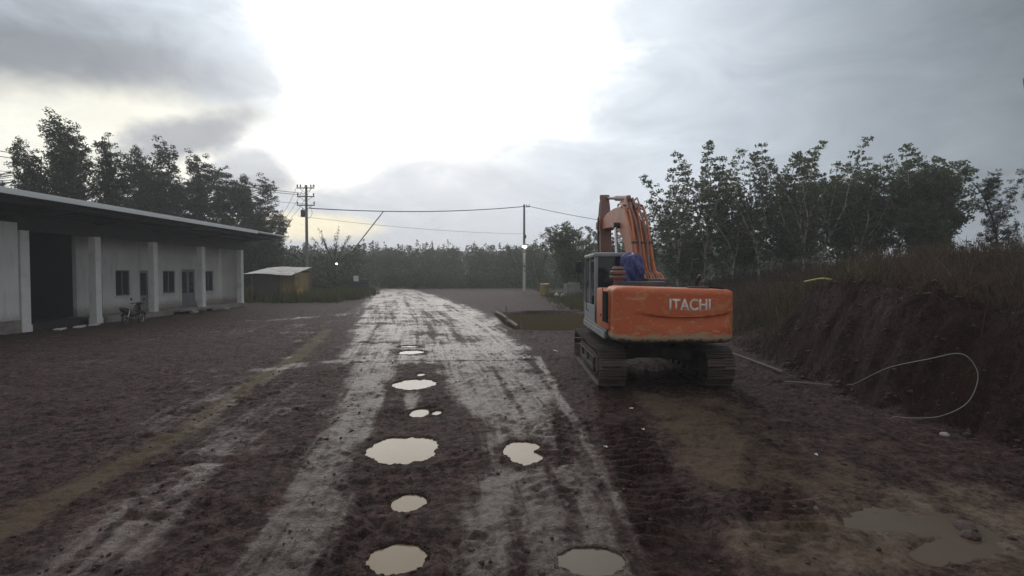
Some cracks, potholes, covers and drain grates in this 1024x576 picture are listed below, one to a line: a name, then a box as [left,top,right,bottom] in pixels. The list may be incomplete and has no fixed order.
pothole [388,492,430,514]
pothole [553,545,631,576]
pothole [362,542,431,576]
pothole [499,440,545,466]
pothole [361,435,444,466]
pothole [407,408,431,418]
pothole [389,378,440,391]
